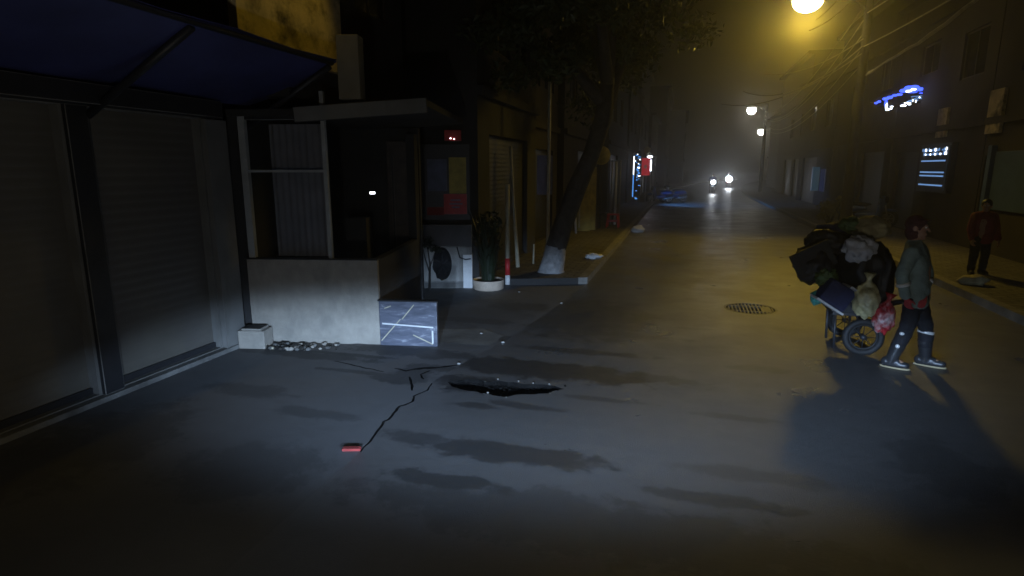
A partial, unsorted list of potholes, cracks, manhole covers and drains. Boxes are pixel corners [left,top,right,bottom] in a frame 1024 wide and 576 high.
pothole [448,378,566,398]
crack [336,361,457,452]
